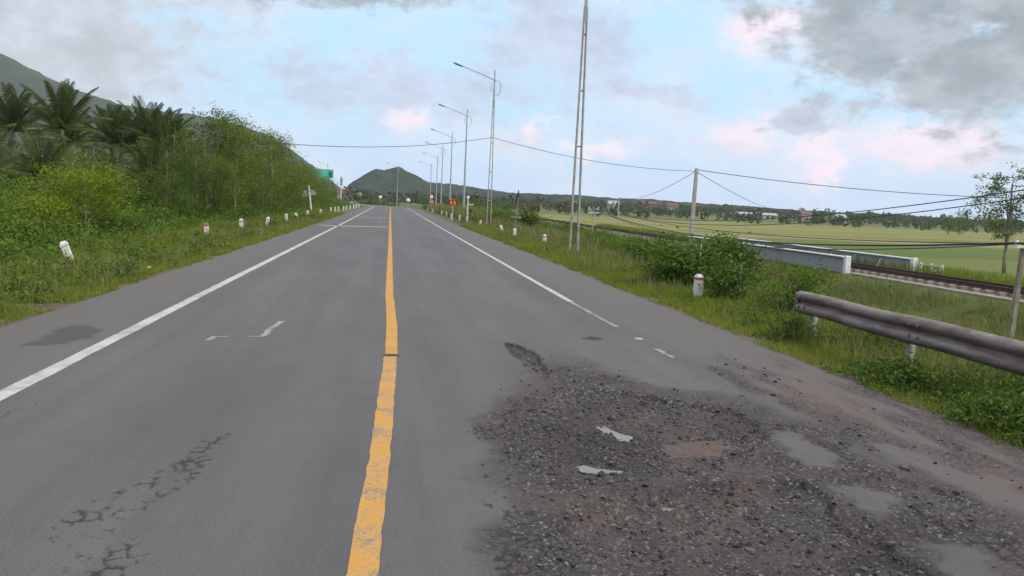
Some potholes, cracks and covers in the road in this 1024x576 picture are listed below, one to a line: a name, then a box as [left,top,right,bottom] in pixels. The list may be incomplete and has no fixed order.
pothole [495,386,777,487]
pothole [501,342,556,380]
pothole [542,473,945,576]
crack [35,432,231,576]
